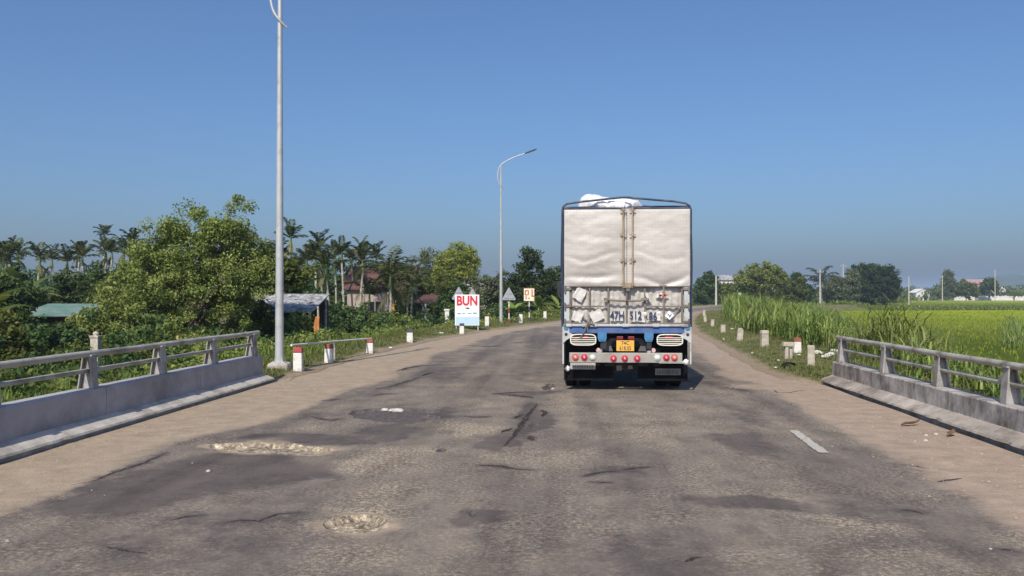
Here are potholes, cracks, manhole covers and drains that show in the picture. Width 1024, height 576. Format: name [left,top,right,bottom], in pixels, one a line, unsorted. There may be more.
crack [220,512,301,524]
crack [585,467,644,483]
crack [495,392,548,446]
pothole [323,514,389,533]
pothole [208,442,336,455]
